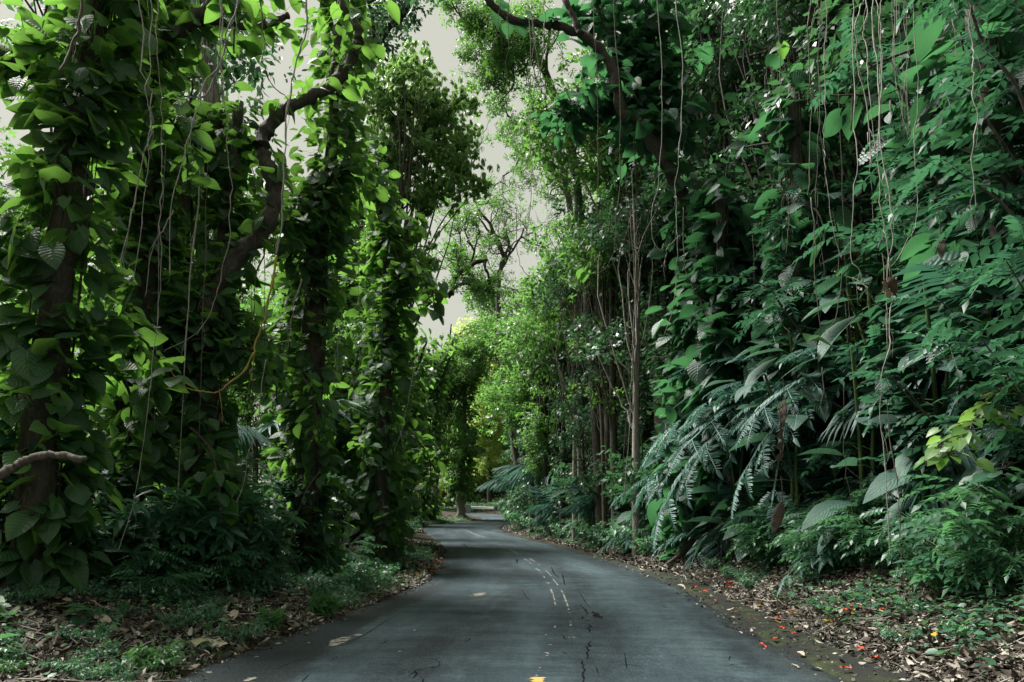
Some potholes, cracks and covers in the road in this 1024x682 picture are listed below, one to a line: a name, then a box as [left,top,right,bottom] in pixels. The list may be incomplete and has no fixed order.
crack [522,567,599,682]
